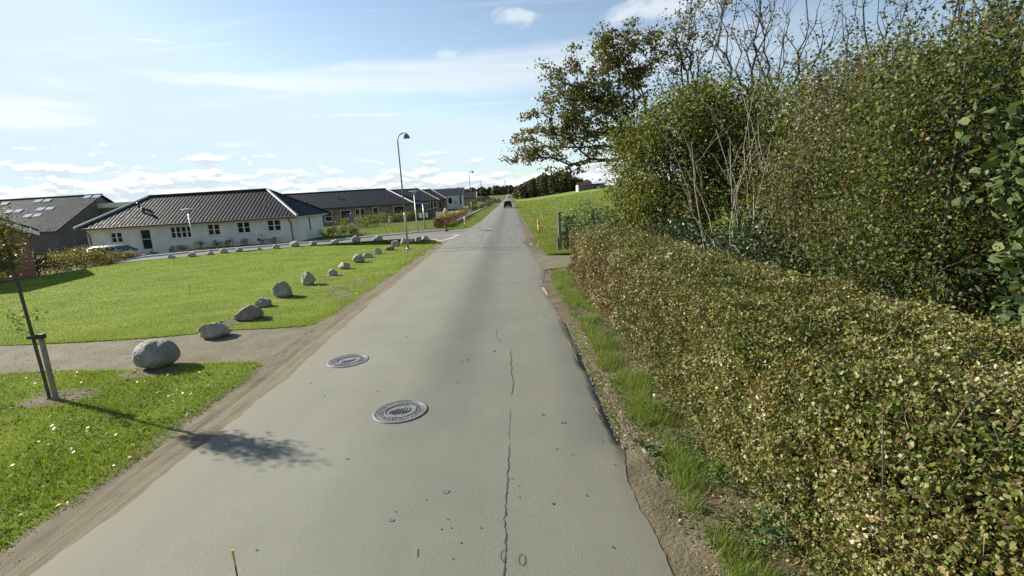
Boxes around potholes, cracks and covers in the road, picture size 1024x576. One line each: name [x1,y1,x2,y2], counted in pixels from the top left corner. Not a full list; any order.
manhole cover [372,399,428,424]
crack [496,332,526,576]
manhole cover [327,354,369,368]
